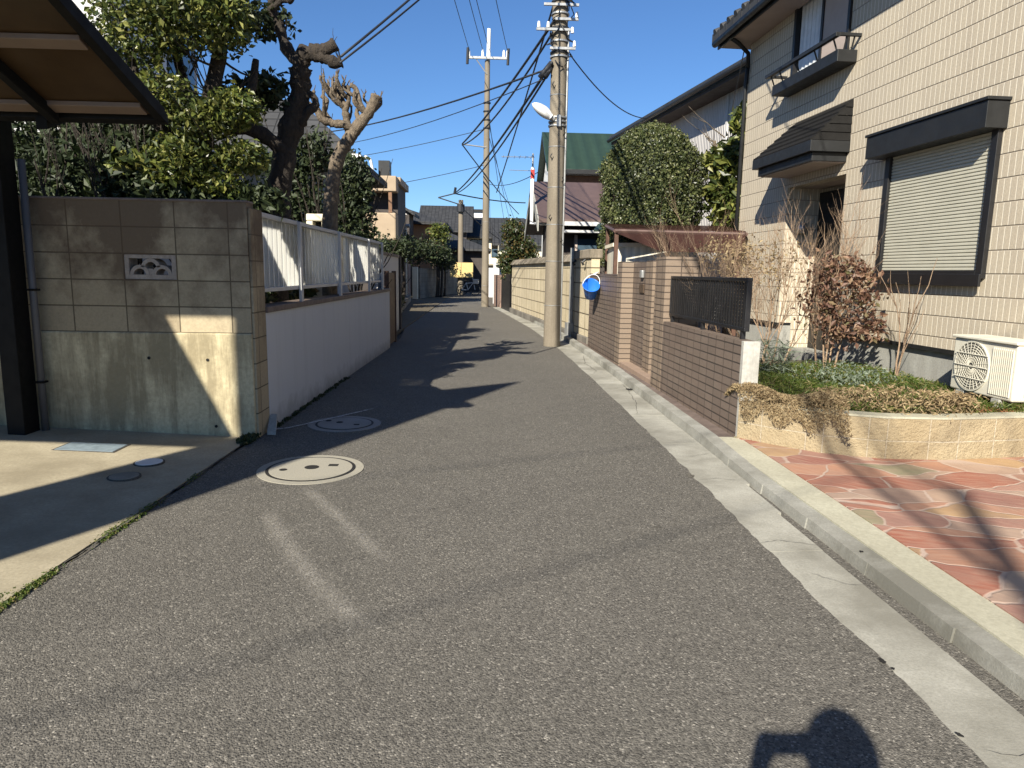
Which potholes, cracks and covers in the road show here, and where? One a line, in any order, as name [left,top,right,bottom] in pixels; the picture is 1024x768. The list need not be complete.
manhole cover [256,455,364,485]
manhole cover [308,416,381,432]
